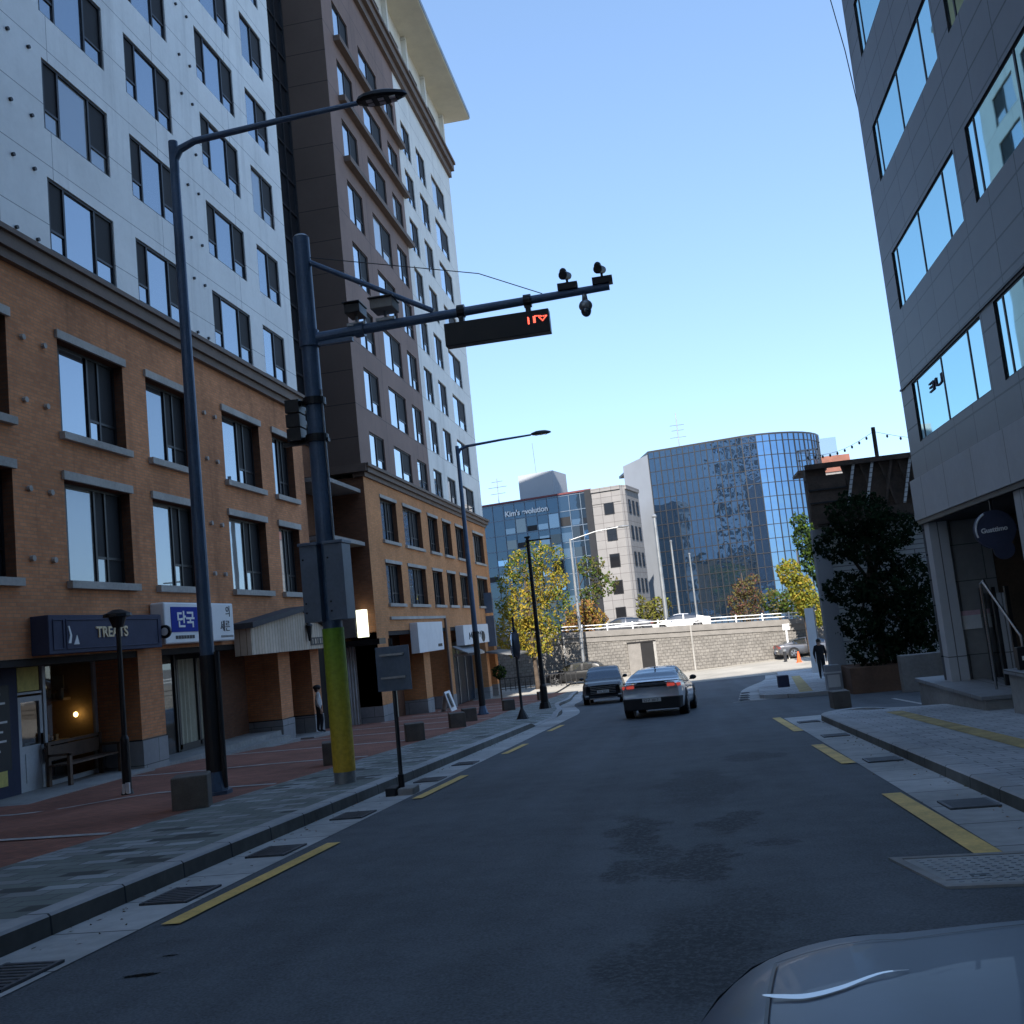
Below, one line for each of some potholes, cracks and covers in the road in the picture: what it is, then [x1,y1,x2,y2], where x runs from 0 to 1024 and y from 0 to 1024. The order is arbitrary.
drain grate [329,810,377,821]
drain grate [0,959,65,993]
manhole cover [888,851,1024,889]
drain grate [245,843,307,859]
drain grate [139,884,222,906]
